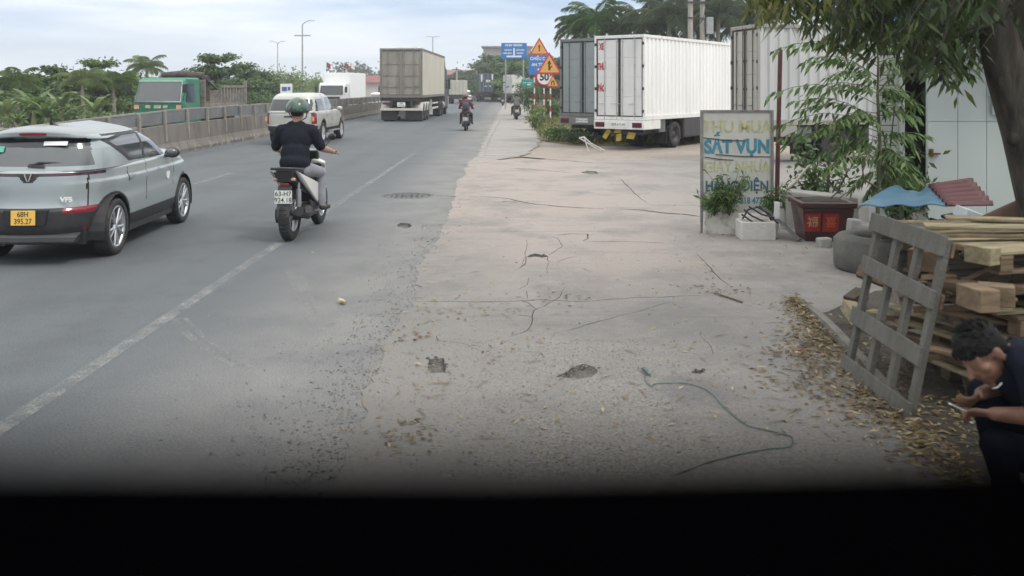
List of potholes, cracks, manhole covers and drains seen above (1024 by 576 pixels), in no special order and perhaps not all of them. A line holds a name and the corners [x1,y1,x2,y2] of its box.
crack [495,181,700,217]
pothole [426,356,448,373]
crack [510,234,657,337]
pothole [556,364,600,379]
crack [484,127,591,173]
